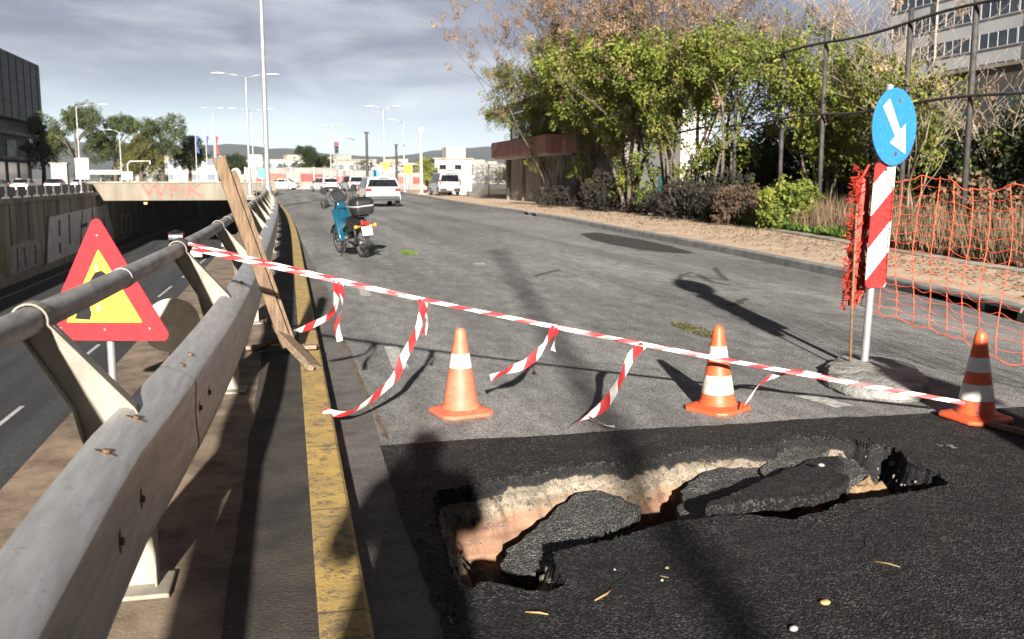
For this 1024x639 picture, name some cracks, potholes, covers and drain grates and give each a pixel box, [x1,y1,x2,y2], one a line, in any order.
pothole [418,432,962,605]
